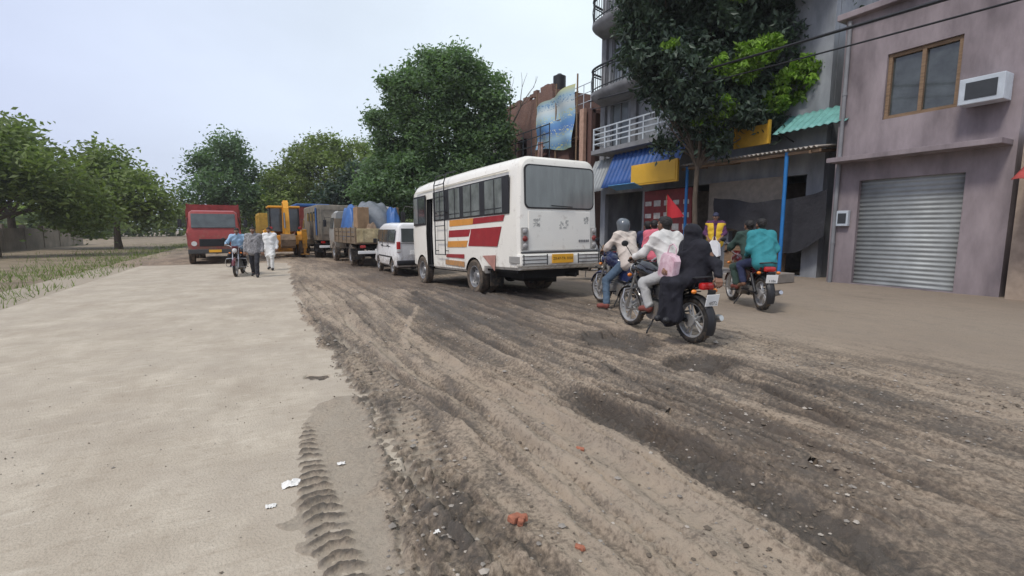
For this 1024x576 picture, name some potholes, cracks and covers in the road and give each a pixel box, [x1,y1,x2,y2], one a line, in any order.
pothole [574,329,662,355]
pothole [661,354,735,376]
